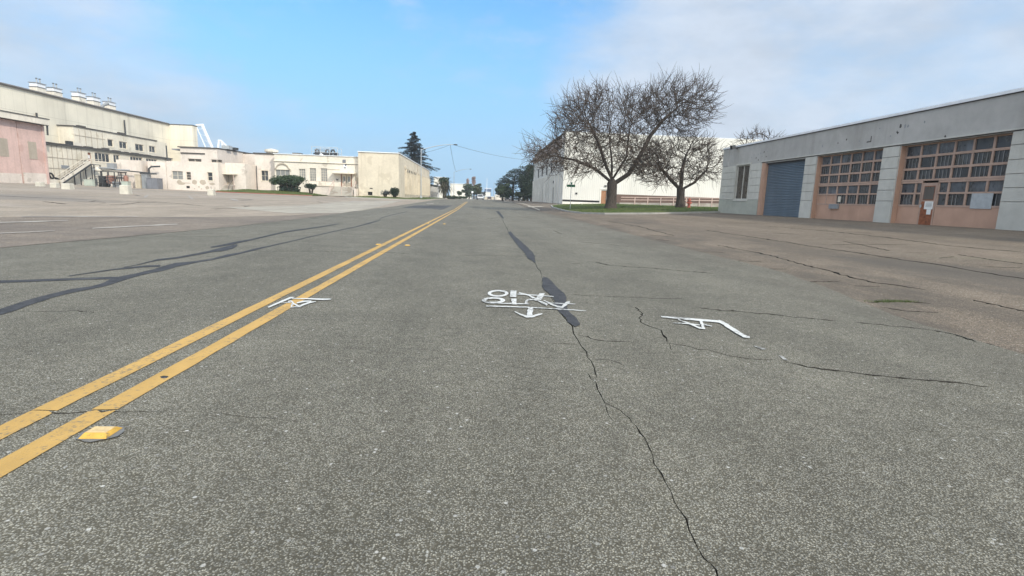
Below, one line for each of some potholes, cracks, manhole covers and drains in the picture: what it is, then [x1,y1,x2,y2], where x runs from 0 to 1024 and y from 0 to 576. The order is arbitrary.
crack [697,281,998,347]
crack [585,295,989,387]
crack [490,216,718,576]
